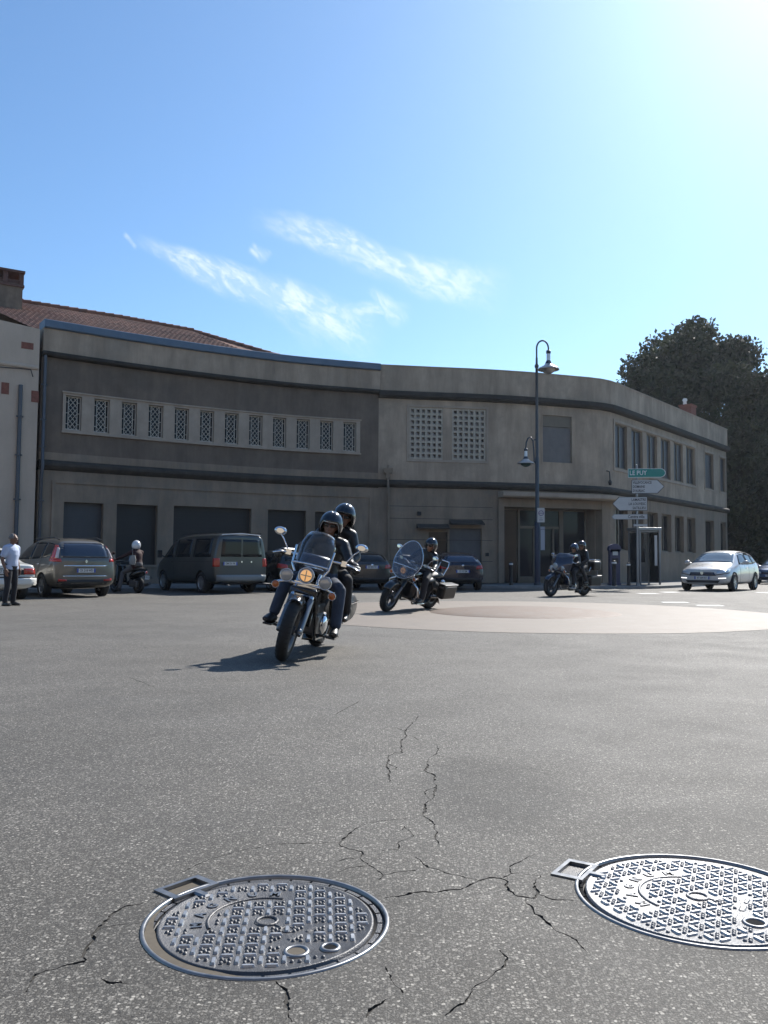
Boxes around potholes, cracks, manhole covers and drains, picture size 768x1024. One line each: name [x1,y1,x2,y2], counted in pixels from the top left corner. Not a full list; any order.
crack [25,895,159,992]
manhole cover [140,874,389,981]
crack [366,967,404,1018]
manhole cover [551,854,768,951]
crack [445,950,508,1016]
crack [182,716,587,952]
